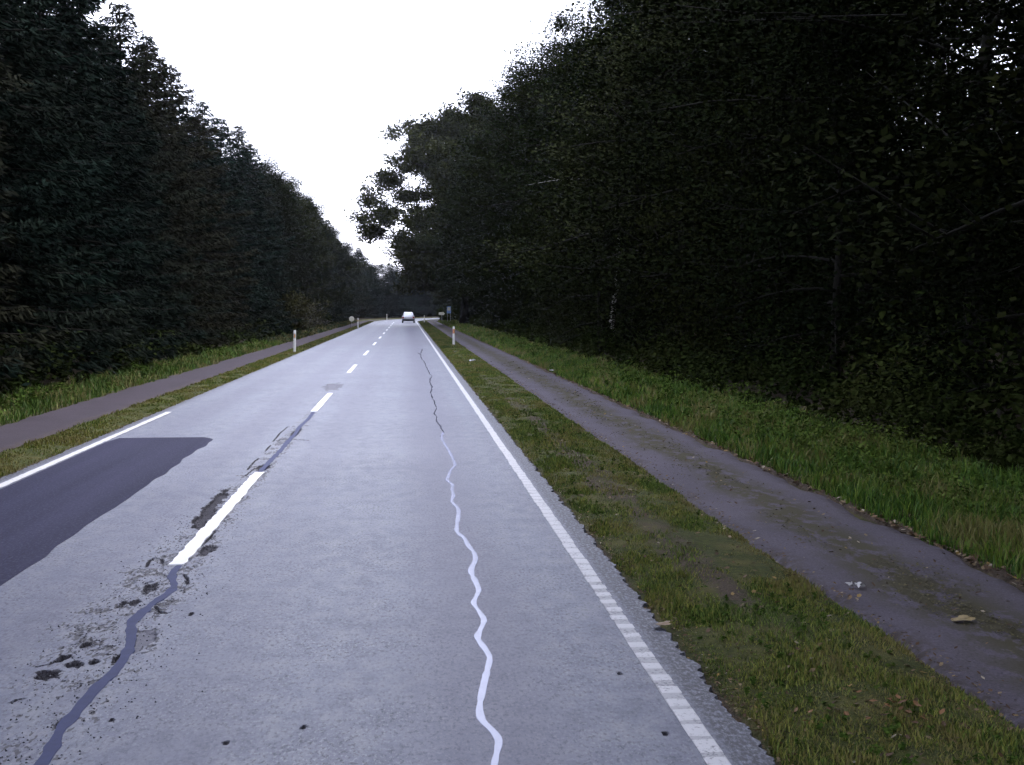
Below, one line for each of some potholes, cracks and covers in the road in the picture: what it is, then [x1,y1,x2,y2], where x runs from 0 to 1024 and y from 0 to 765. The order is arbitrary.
pothole [191,489,229,530]
pothole [34,669,61,681]
crack [10,425,308,703]
pothole [141,583,159,595]
crack [418,349,503,765]
